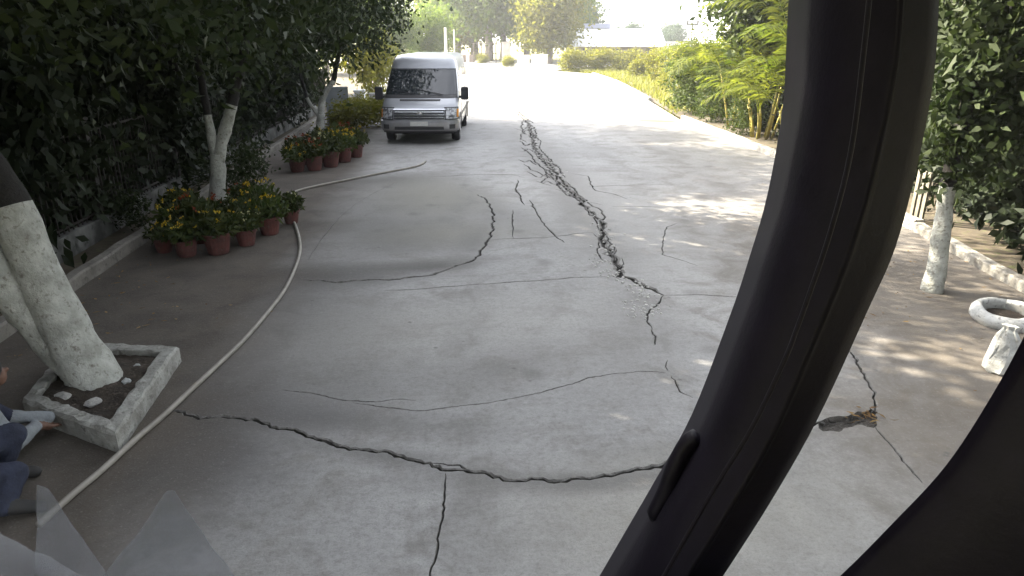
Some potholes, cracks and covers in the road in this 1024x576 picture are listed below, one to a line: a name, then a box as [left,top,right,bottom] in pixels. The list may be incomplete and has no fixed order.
crack [172,108,825,576]
crack [849,350,922,483]
pothole [818,408,877,432]
